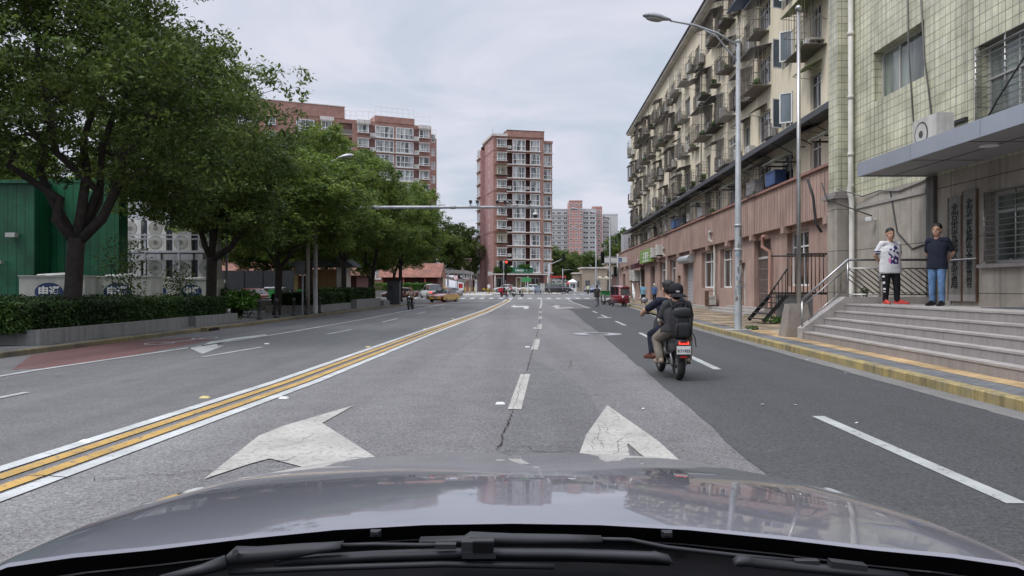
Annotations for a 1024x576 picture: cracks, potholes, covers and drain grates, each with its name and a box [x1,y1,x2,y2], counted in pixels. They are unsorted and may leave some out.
crack [499,417,635,455]
